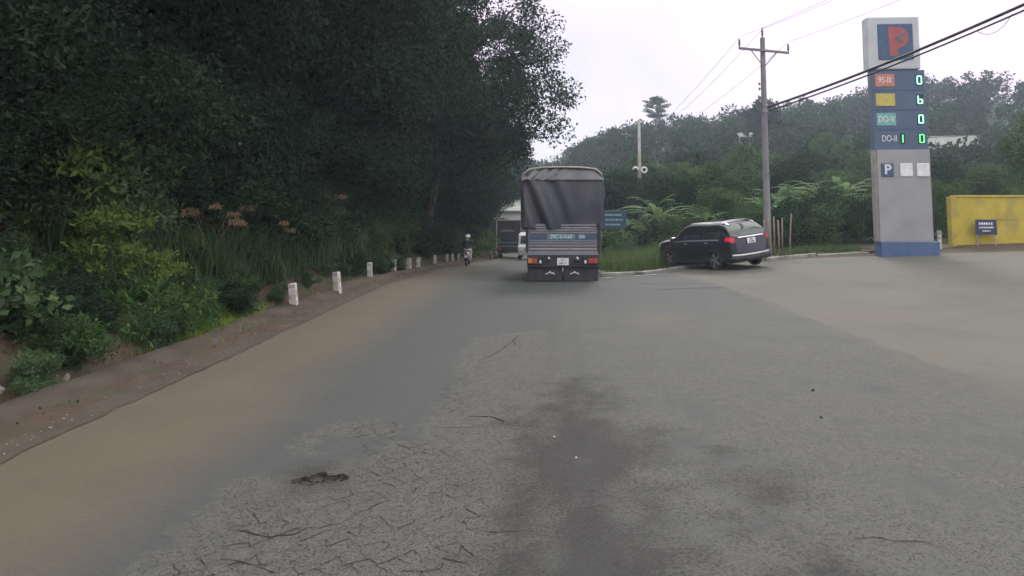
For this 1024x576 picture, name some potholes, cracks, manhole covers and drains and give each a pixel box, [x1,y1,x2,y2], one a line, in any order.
pothole [291,472,350,486]
crack [173,422,521,576]
crack [432,379,504,428]
